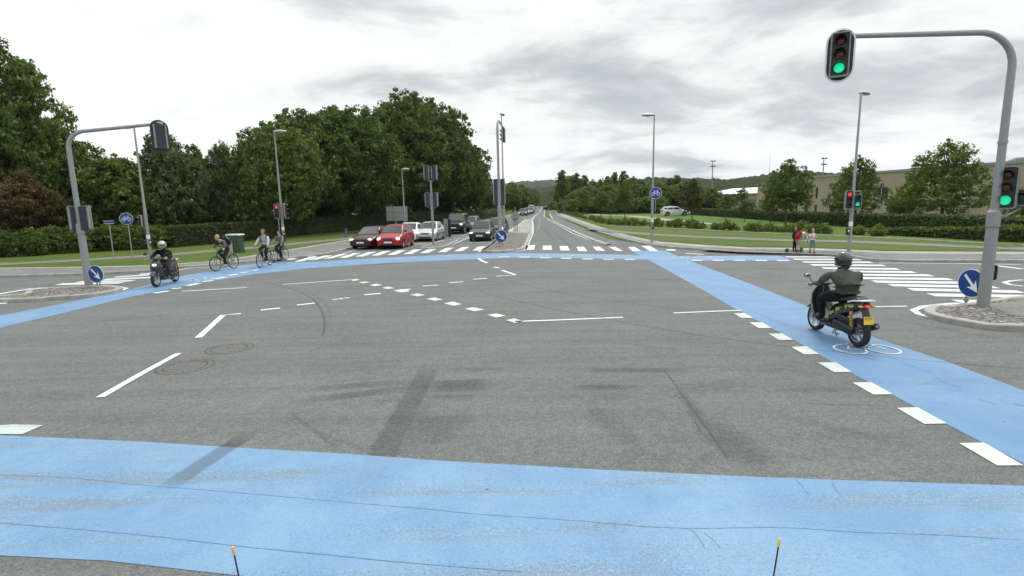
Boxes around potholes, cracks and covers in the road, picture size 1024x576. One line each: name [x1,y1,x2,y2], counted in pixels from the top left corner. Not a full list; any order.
manhole cover [155,359,215,375]
manhole cover [204,343,254,355]
